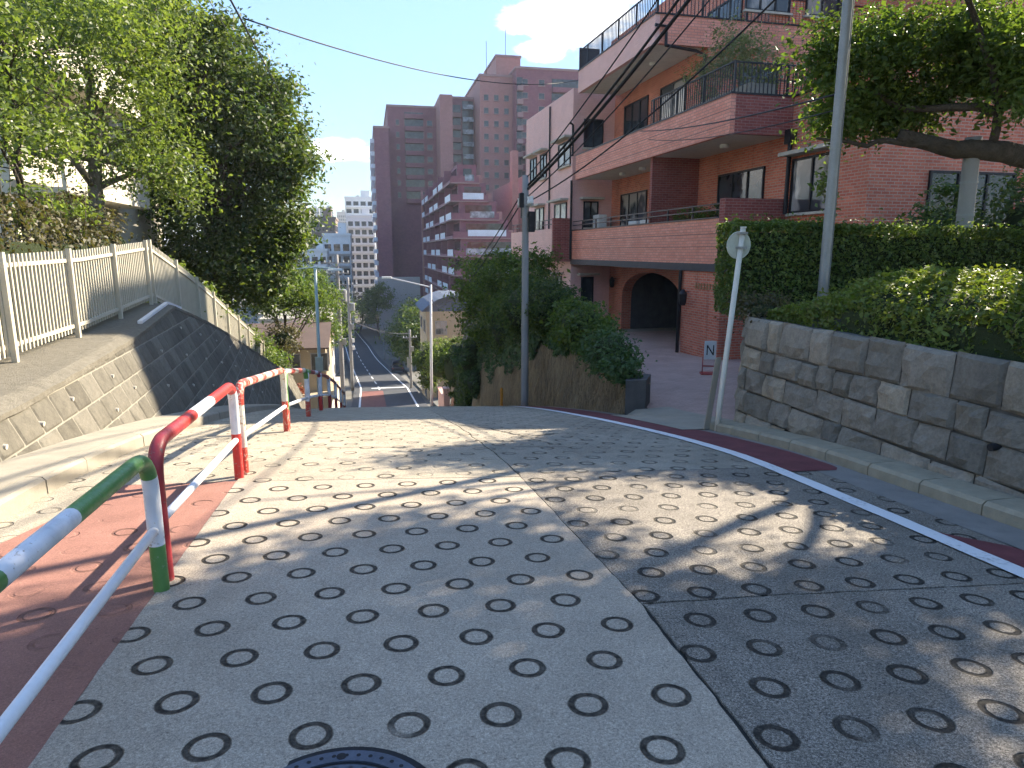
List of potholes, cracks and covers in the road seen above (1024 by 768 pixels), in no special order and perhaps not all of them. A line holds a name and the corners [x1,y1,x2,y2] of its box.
manhole cover [284,746,426,768]
